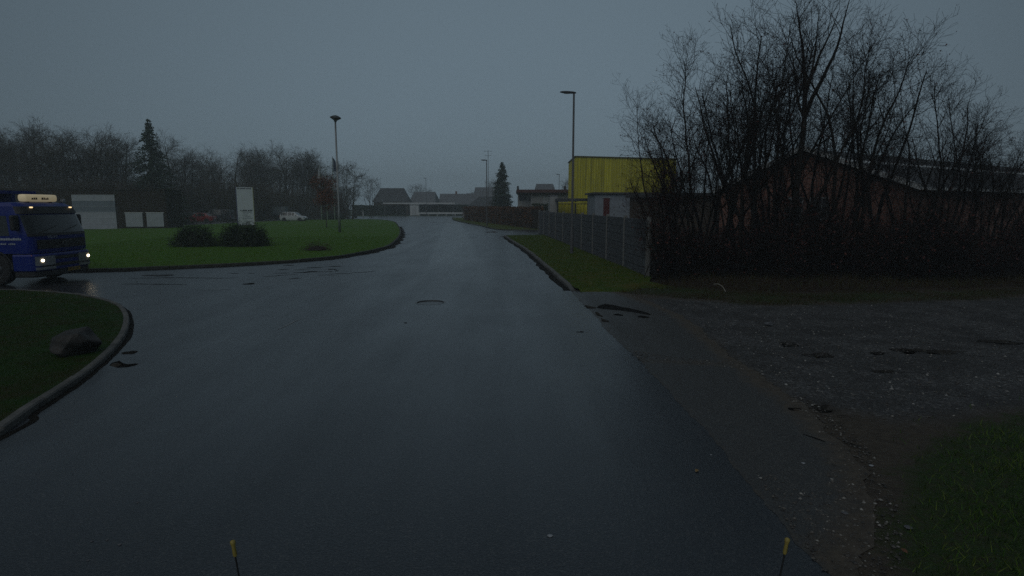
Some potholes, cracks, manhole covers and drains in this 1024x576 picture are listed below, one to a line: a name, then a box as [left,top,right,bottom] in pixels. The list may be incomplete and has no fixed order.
pothole [810,405,840,413]
pothole [597,304,651,315]
